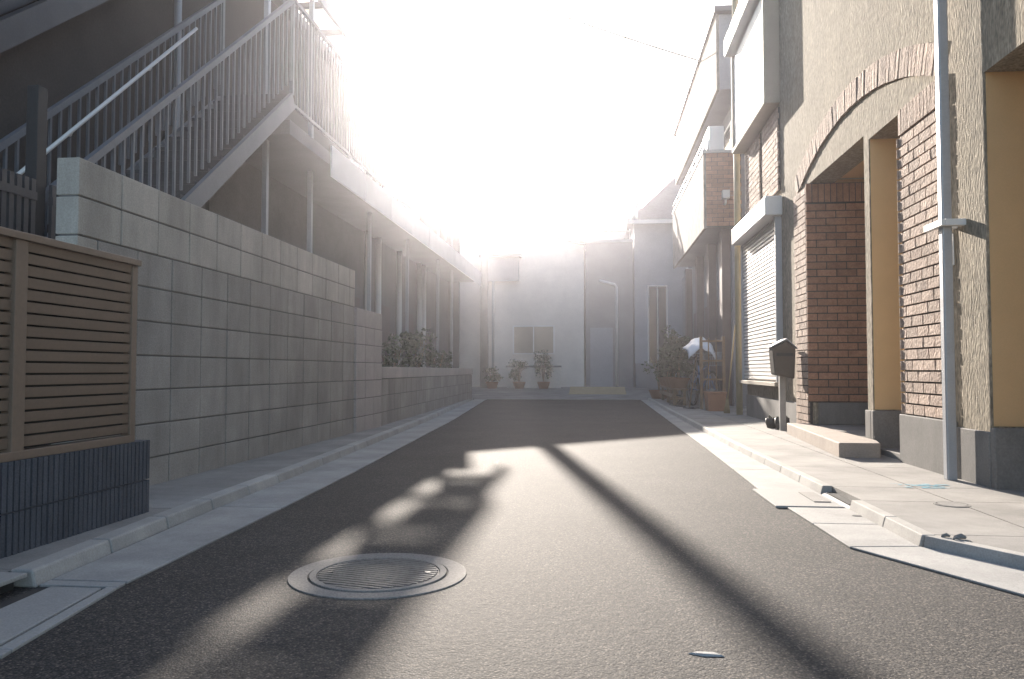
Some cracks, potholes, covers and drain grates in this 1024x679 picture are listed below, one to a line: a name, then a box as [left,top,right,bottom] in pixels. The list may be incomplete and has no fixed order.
manhole cover [287,553,467,600]
